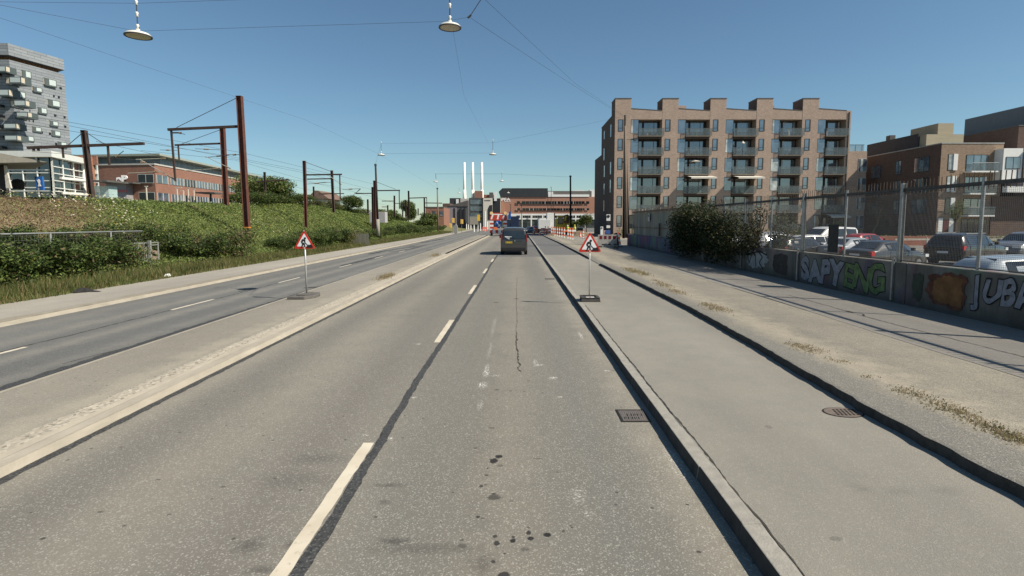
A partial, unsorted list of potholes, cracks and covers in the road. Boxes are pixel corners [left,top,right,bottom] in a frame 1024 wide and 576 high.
drain grate [615,409,651,422]
